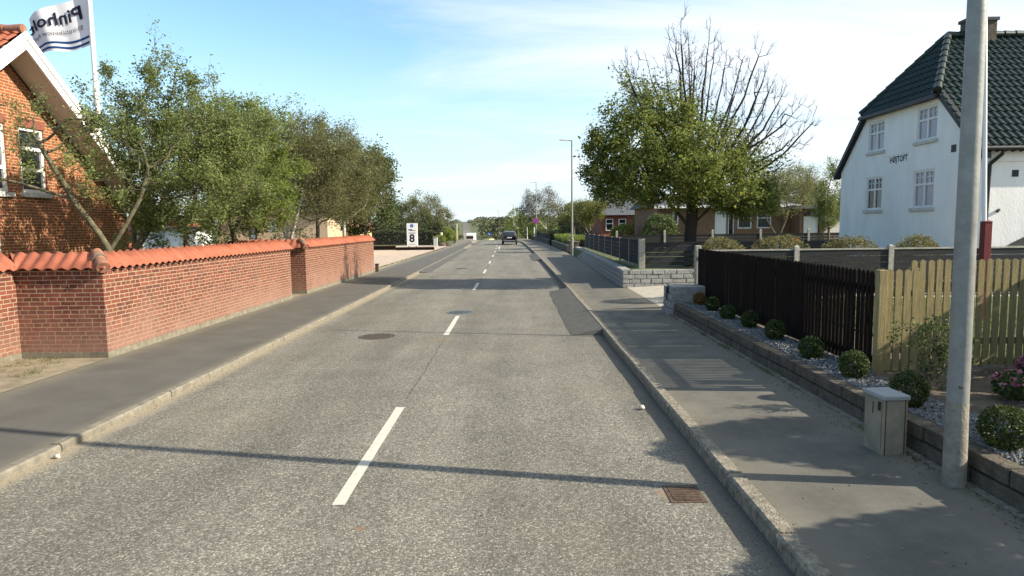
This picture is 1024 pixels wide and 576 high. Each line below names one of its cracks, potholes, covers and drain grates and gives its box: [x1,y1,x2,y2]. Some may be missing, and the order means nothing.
drain grate [662,485,708,503]
